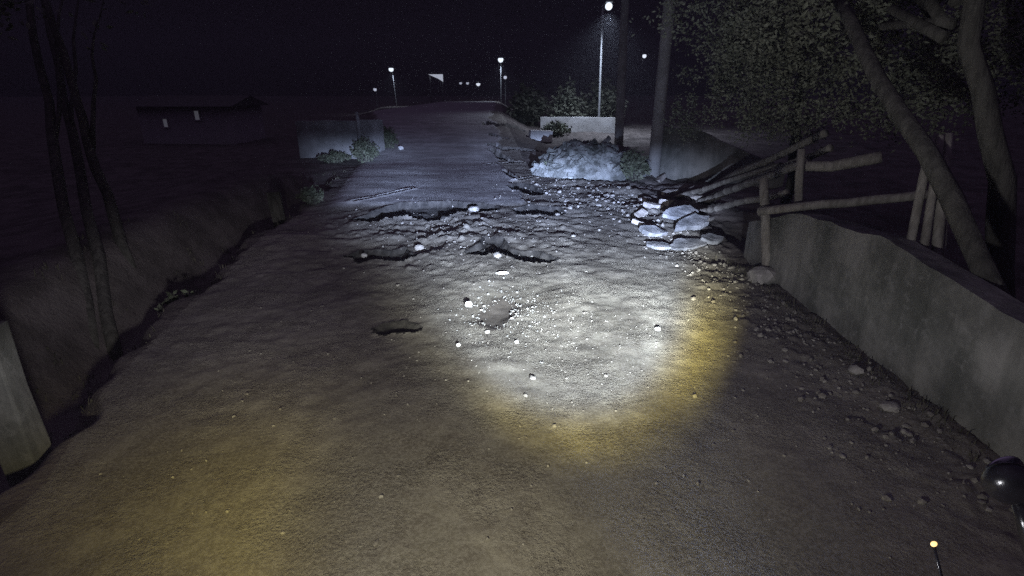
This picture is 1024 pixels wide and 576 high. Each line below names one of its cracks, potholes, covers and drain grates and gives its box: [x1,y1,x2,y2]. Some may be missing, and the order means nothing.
pothole [476,298,523,331]
pothole [371,319,423,336]
crack [482,121,547,180]
